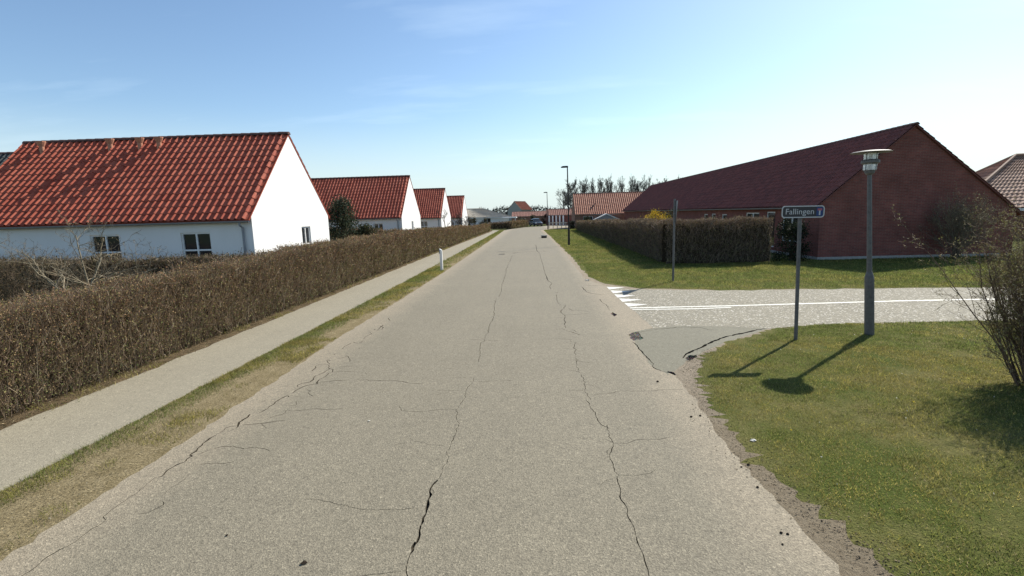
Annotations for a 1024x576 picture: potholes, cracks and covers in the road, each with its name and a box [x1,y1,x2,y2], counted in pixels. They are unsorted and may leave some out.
crack [316,259,511,576]
crack [22,318,418,576]
crack [536,248,674,575]
